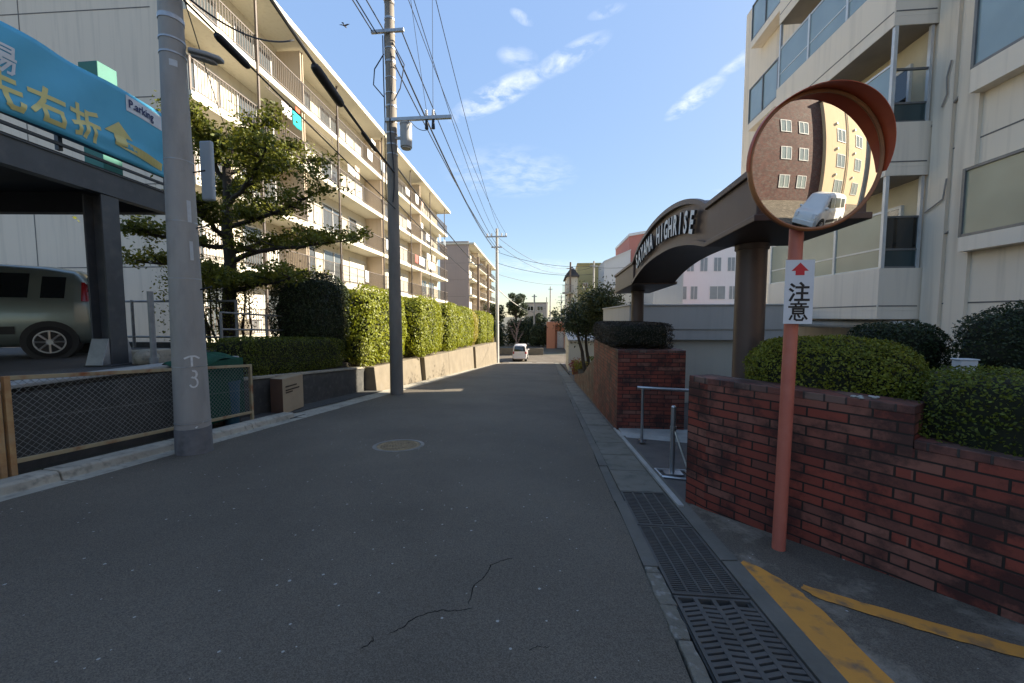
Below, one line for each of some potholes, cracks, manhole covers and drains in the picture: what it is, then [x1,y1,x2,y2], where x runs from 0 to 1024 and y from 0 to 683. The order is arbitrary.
drain grate [620,491,692,528]
crack [360,558,512,649]
drain grate [673,595,819,683]
drain grate [638,525,750,600]
manhole cover [372,439,424,452]
